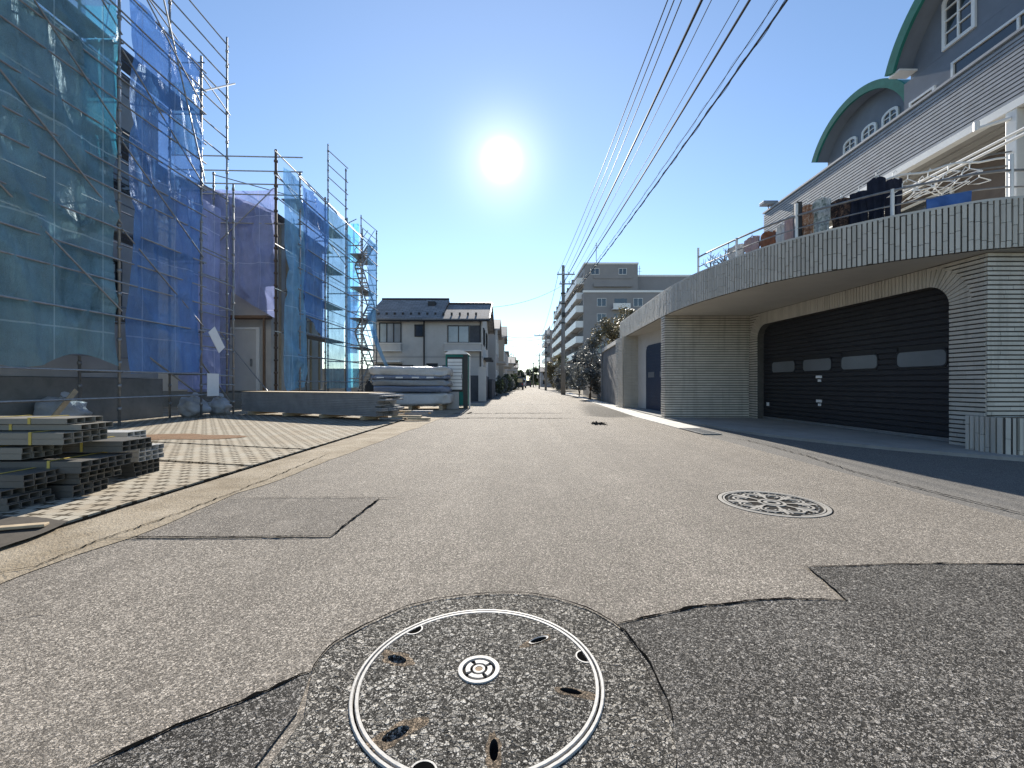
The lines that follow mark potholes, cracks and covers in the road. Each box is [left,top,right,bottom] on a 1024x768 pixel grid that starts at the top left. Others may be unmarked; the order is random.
crack [91,562,1024,764]
manhole cover [717,490,834,518]
manhole cover [348,609,605,768]
